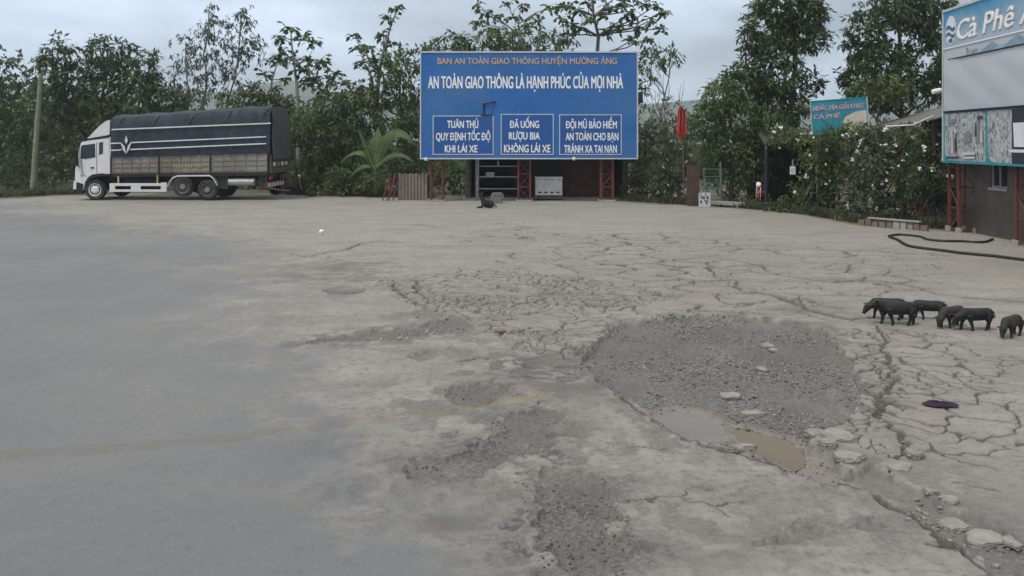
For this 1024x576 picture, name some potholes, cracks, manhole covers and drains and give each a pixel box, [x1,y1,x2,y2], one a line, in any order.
pothole [582,314,867,486]
pothole [404,401,580,483]
crack [375,228,1024,494]
pothole [515,466,660,576]
pothole [444,382,516,408]
pothole [321,285,369,295]
crack [839,483,986,572]
pothole [309,316,480,343]
